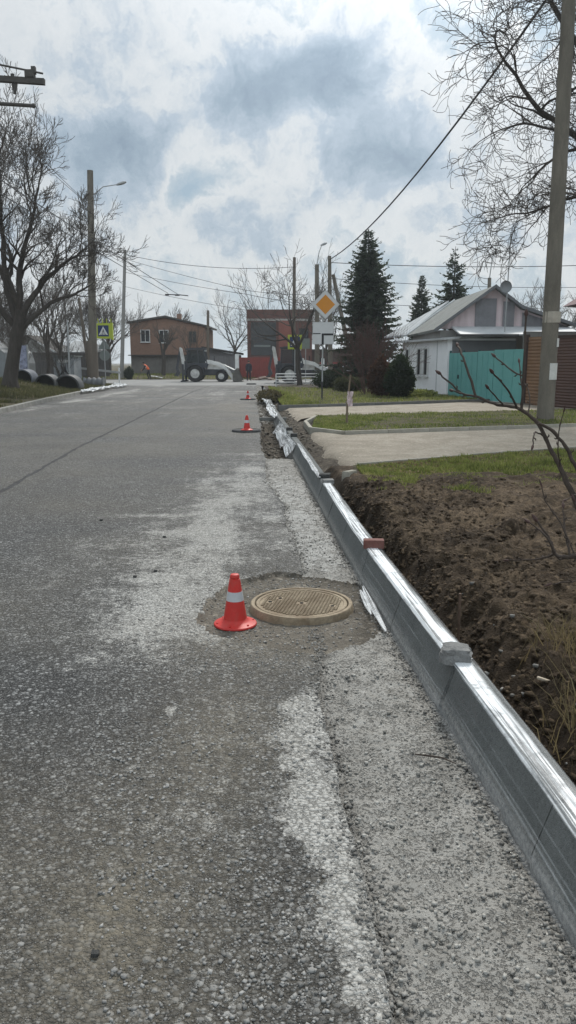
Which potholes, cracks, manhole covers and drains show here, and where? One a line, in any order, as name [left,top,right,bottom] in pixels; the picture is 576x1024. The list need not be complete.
manhole cover [249,587,354,626]
